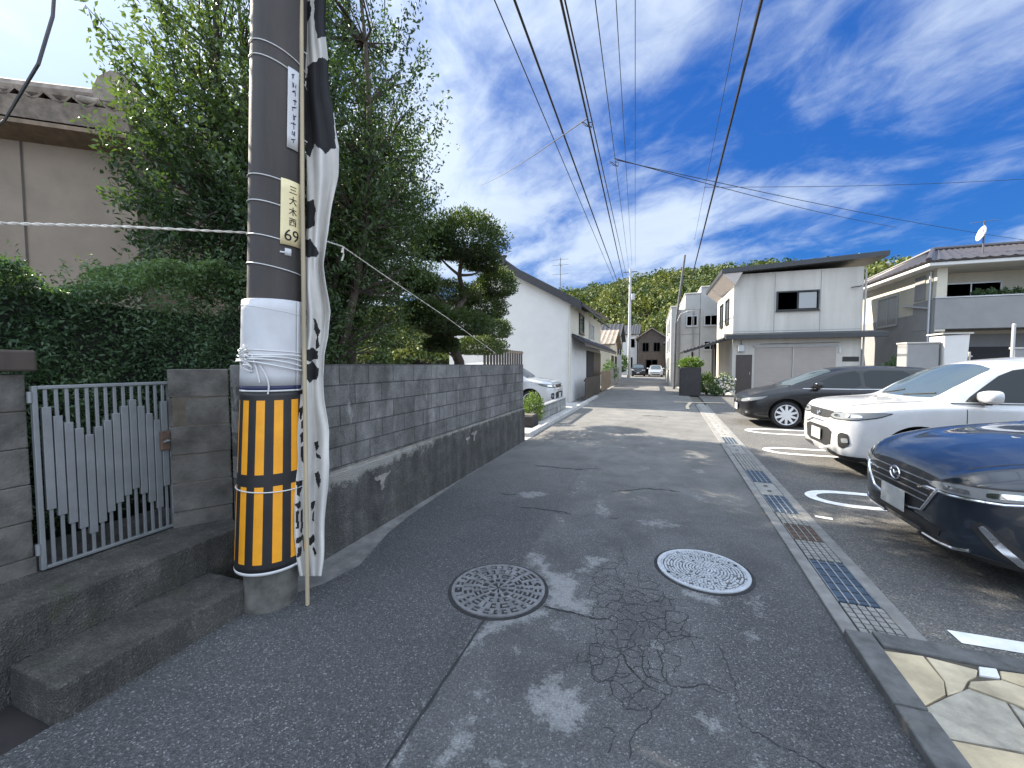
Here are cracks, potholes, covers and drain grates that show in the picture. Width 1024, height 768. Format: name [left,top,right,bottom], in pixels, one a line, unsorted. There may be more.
manhole cover [654,548,756,596]
manhole cover [448,564,549,621]
crack [545,549,826,768]
